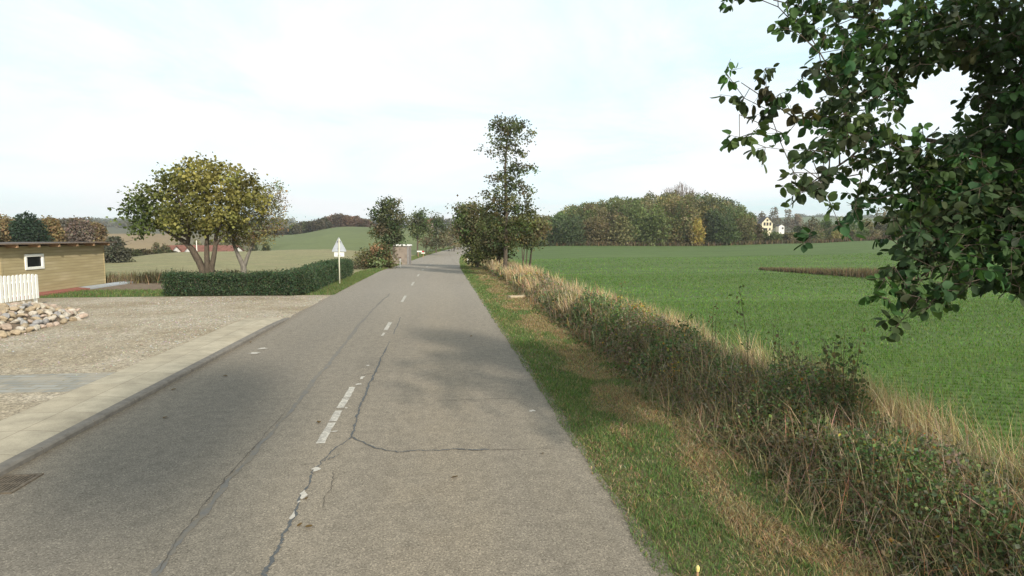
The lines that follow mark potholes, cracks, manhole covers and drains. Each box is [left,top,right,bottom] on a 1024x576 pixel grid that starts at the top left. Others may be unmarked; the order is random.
drain grate [0,473,44,494]
